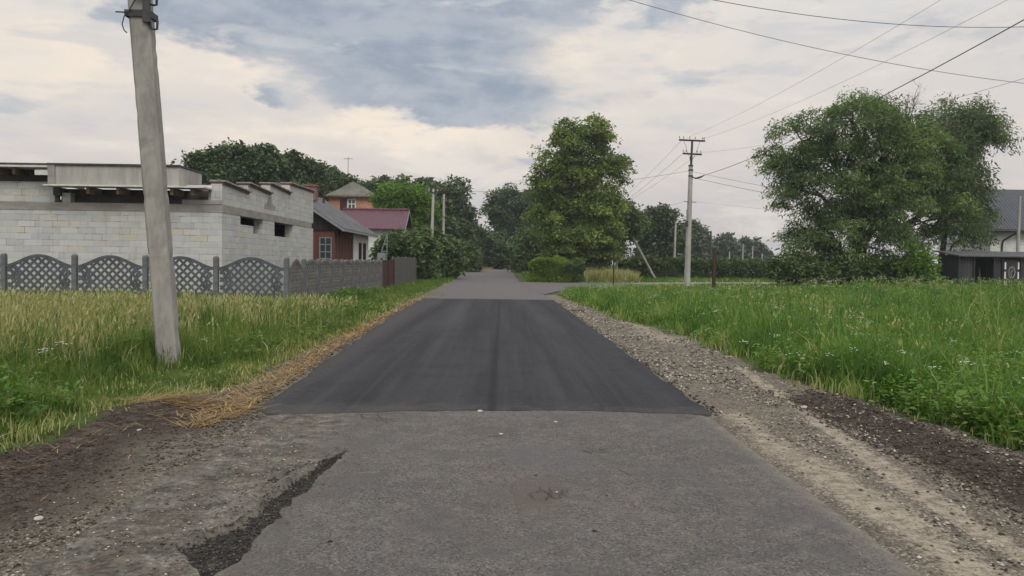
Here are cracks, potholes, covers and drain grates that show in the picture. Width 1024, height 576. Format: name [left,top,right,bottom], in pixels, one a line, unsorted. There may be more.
pothole [146,450,348,576]
